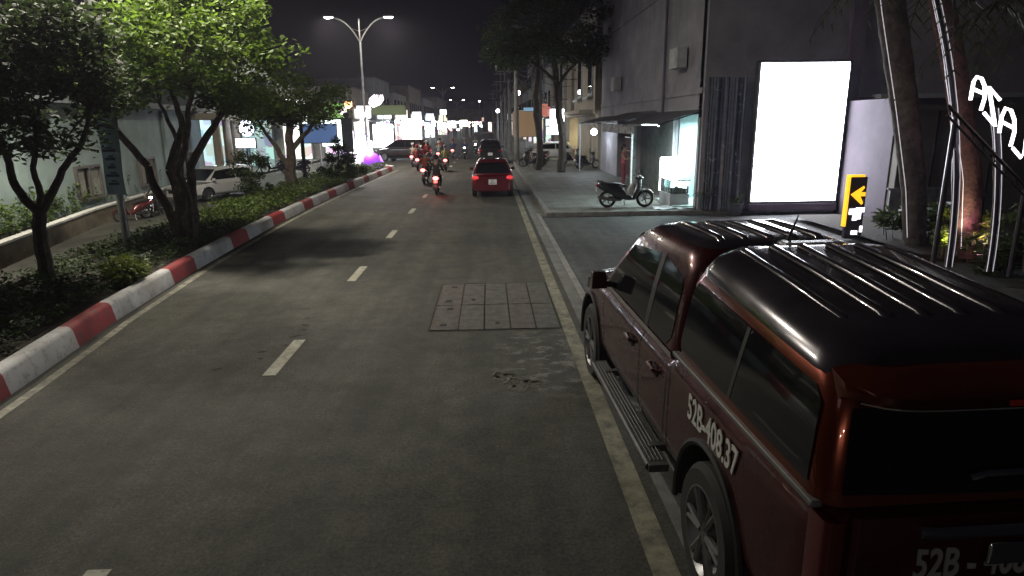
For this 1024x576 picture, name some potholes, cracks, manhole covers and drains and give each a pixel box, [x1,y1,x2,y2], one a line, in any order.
manhole cover [485,283,507,304]
manhole cover [527,282,551,304]
manhole cover [485,304,510,329]
manhole cover [458,304,485,330]
pothole [491,371,520,381]
manhole cover [461,283,485,305]
pothole [503,377,550,392]
manhole cover [532,303,560,328]
manhole cover [437,284,464,305]
manhole cover [509,304,536,329]
manhole cover [430,305,461,331]
manhole cover [506,283,530,304]
